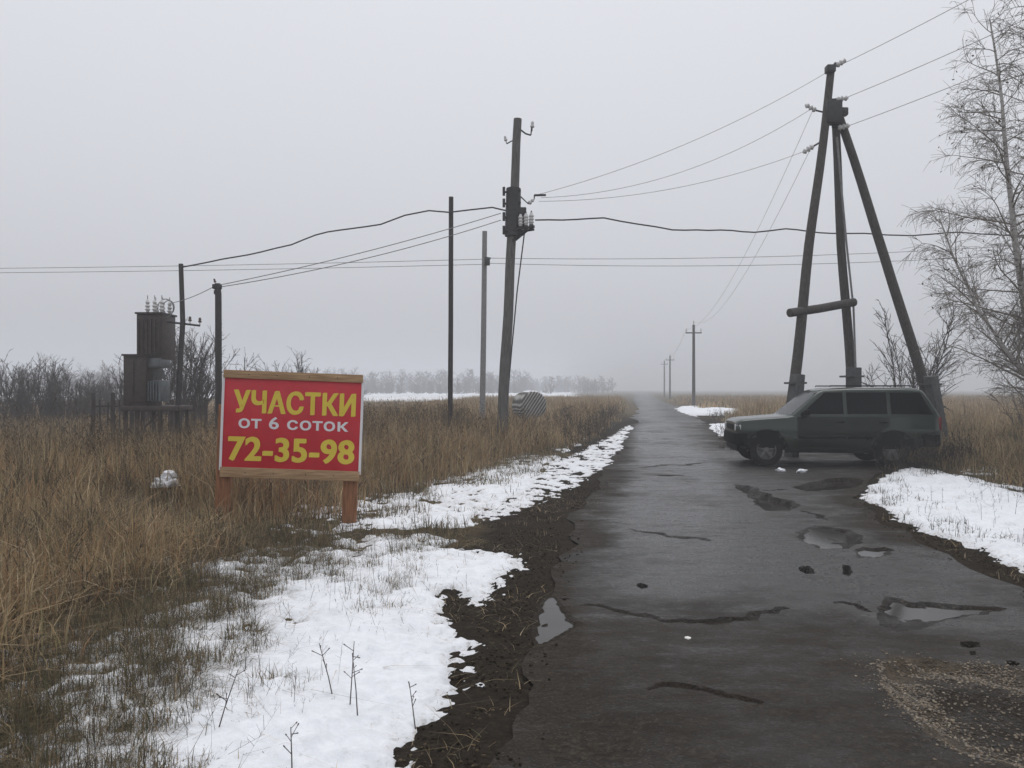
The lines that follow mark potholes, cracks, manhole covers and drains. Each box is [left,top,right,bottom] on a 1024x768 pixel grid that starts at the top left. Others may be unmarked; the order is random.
crack [580,603,790,625]
pothole [876,597,1008,631]
crack [833,601,872,612]
pothole [792,478,863,491]
pothole [794,525,864,549]
crack [646,682,764,705]
pothole [798,566,815,574]
pothole [733,484,801,511]
crack [638,462,707,476]
crack [631,529,712,542]
pothole [854,547,895,558]
